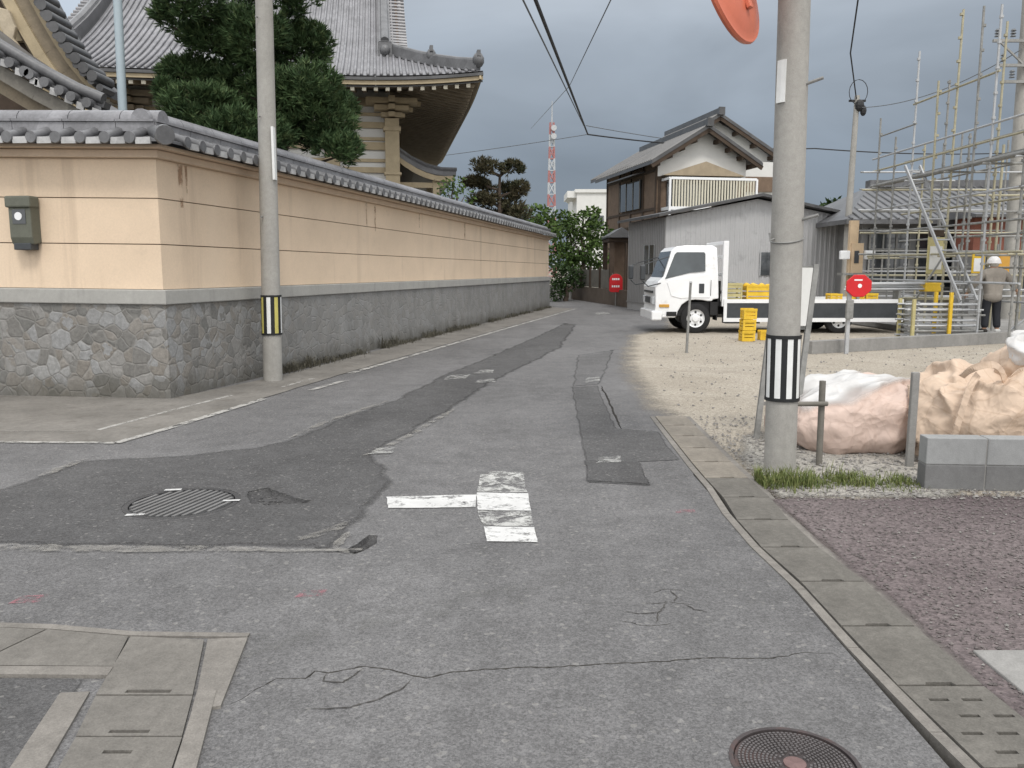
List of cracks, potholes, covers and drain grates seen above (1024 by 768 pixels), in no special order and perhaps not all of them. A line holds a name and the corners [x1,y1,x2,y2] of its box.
crack [231,652,836,709]
manhole cover [729,727,862,768]
crack [624,589,707,626]
pothole [247,489,308,505]
